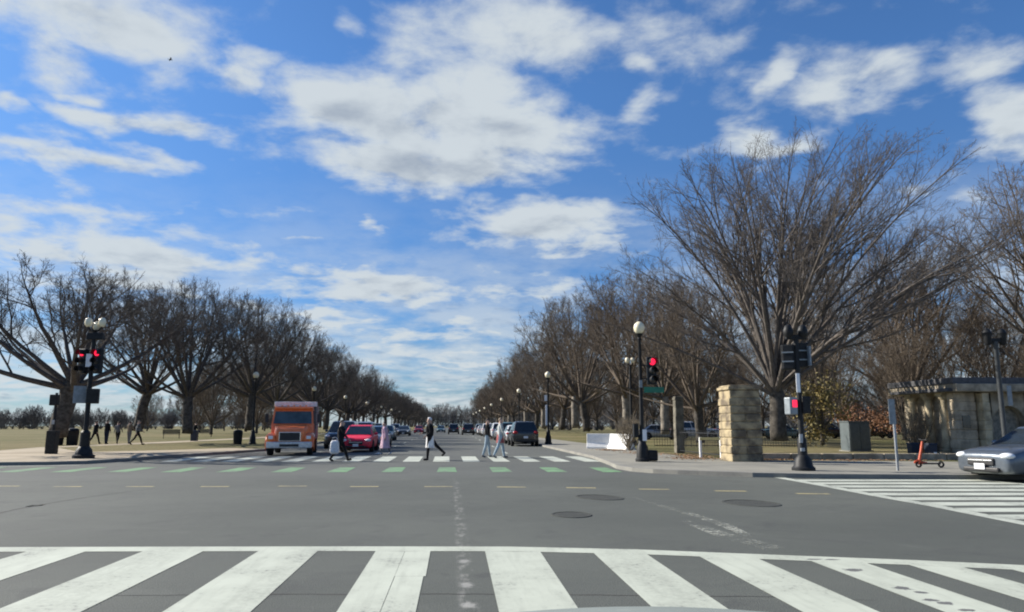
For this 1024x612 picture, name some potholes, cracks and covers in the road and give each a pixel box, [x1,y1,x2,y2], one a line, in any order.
manhole cover [721,499,782,507]
